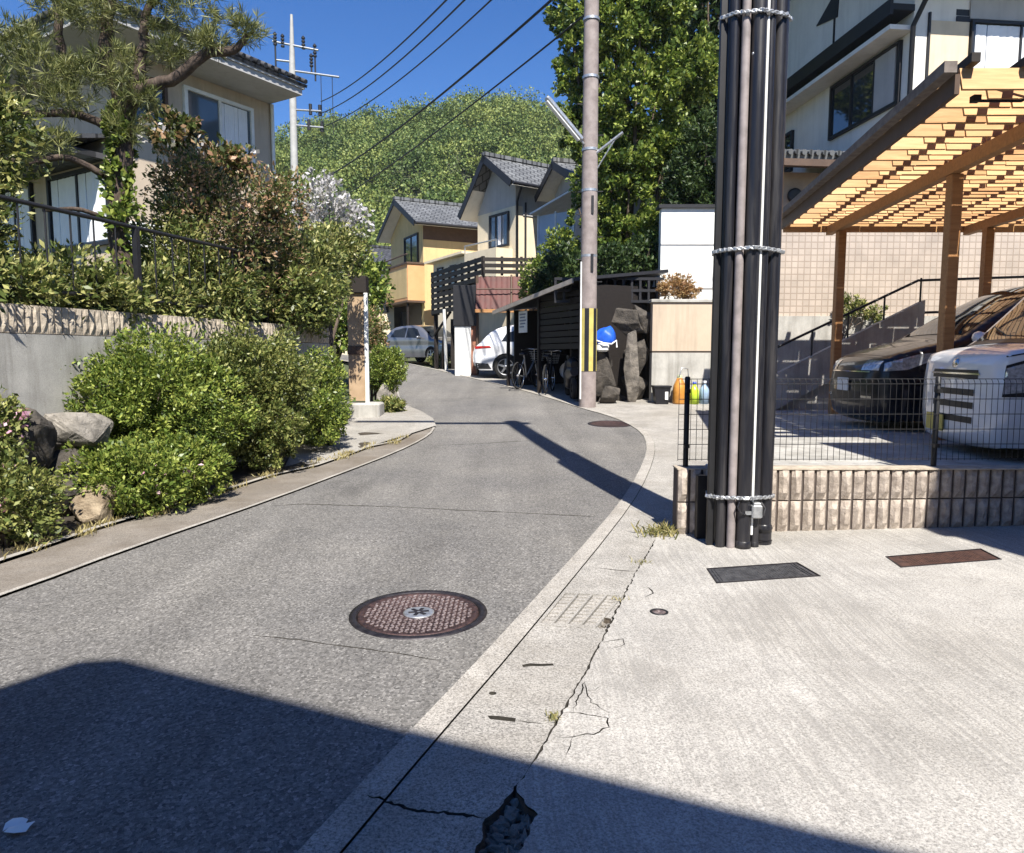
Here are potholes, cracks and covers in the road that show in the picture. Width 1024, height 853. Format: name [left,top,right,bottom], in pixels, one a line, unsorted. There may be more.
pothole [475,777,537,853]
drain grate [535,590,625,628]
manhole cover [349,590,487,640]
utility cover [885,548,1002,568]
crack [478,542,654,765]
crack [377,798,481,818]
utility cover [706,562,821,583]
